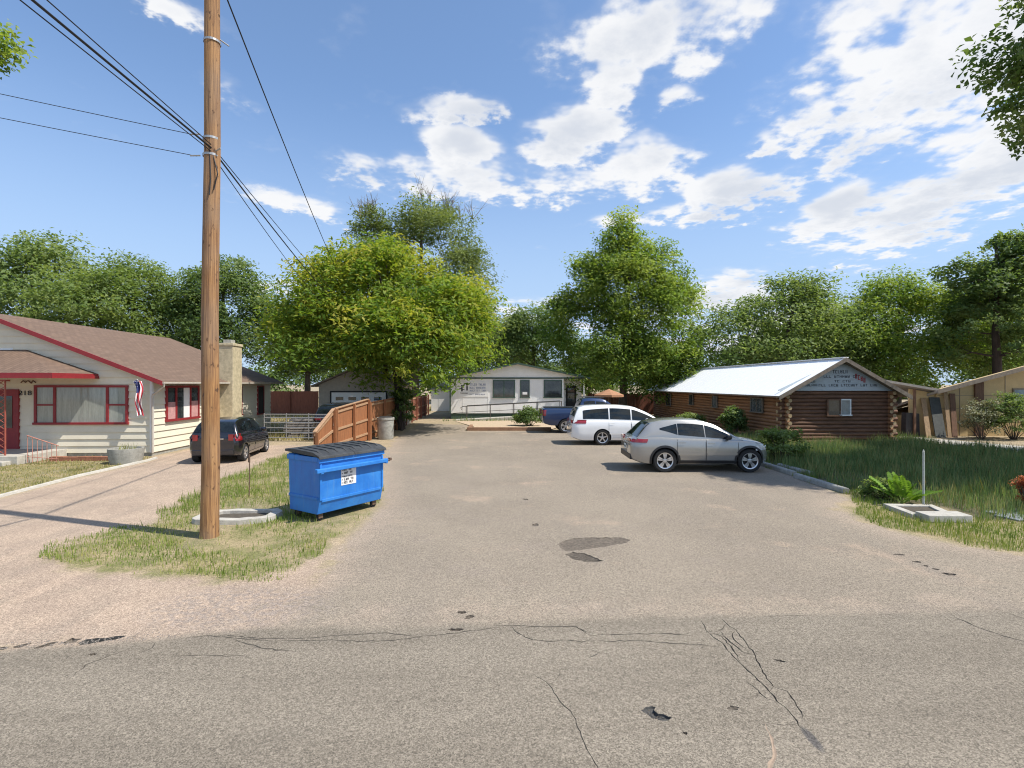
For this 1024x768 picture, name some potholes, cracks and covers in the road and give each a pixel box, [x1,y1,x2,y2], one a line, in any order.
crack [181,627,495,656]
pothole [641,706,672,721]
crack [701,621,807,768]
crack [536,668,598,768]
